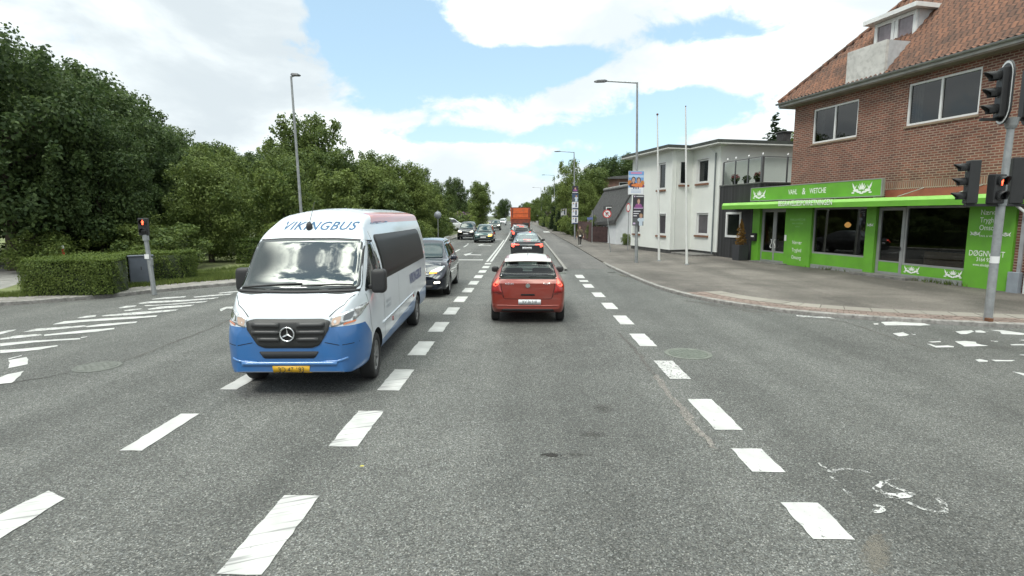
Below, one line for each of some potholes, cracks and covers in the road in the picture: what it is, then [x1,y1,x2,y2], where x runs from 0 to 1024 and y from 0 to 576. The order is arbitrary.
manhole cover [664,348,713,359]
manhole cover [71,361,122,372]
